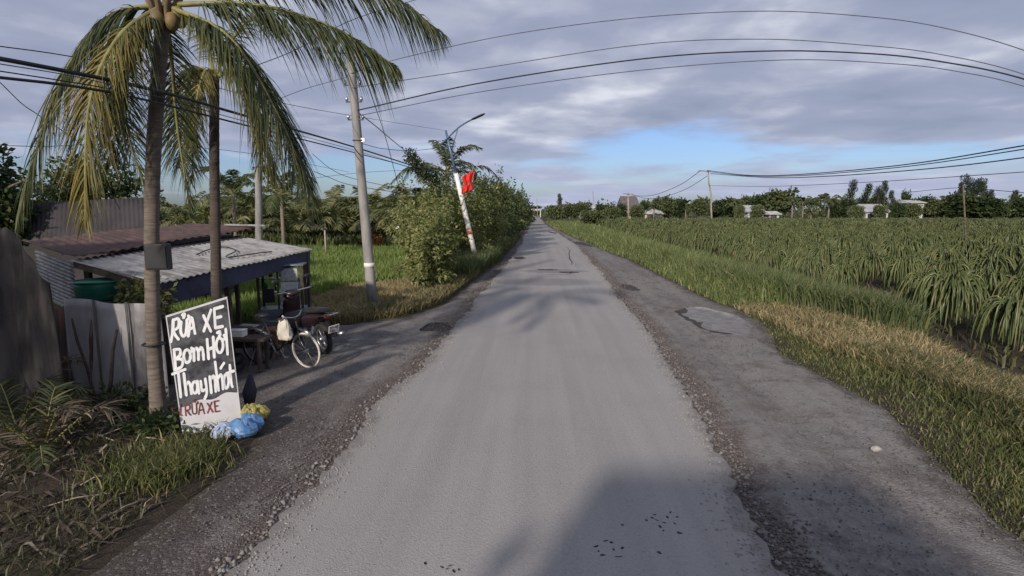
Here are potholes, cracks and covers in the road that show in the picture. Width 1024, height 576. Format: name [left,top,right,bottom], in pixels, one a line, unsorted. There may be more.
pothole [419,322,453,332]
